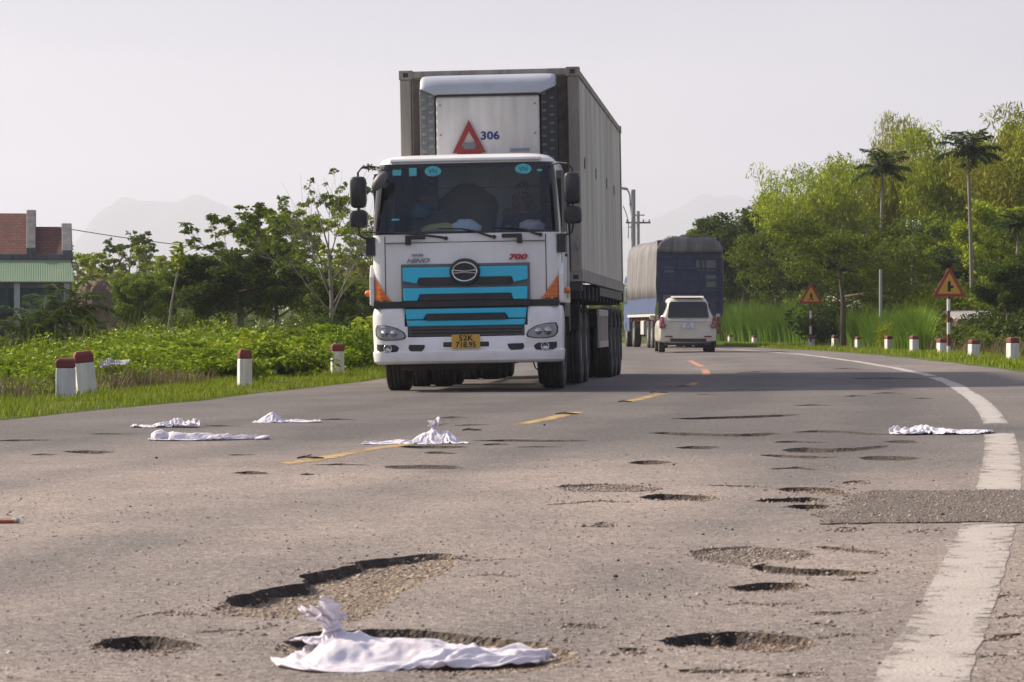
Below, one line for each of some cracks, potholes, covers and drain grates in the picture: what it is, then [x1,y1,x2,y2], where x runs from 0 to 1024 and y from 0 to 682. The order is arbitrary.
pothole [657,631,821,653]
pothole [640,493,718,501]
pothole [690,546,814,566]
pothole [782,445,889,453]
pothole [728,582,813,592]
pothole [749,562,878,577]
pothole [206,553,460,622]
pothole [779,487,847,495]
pothole [90,636,202,654]
pothole [556,483,663,492]
